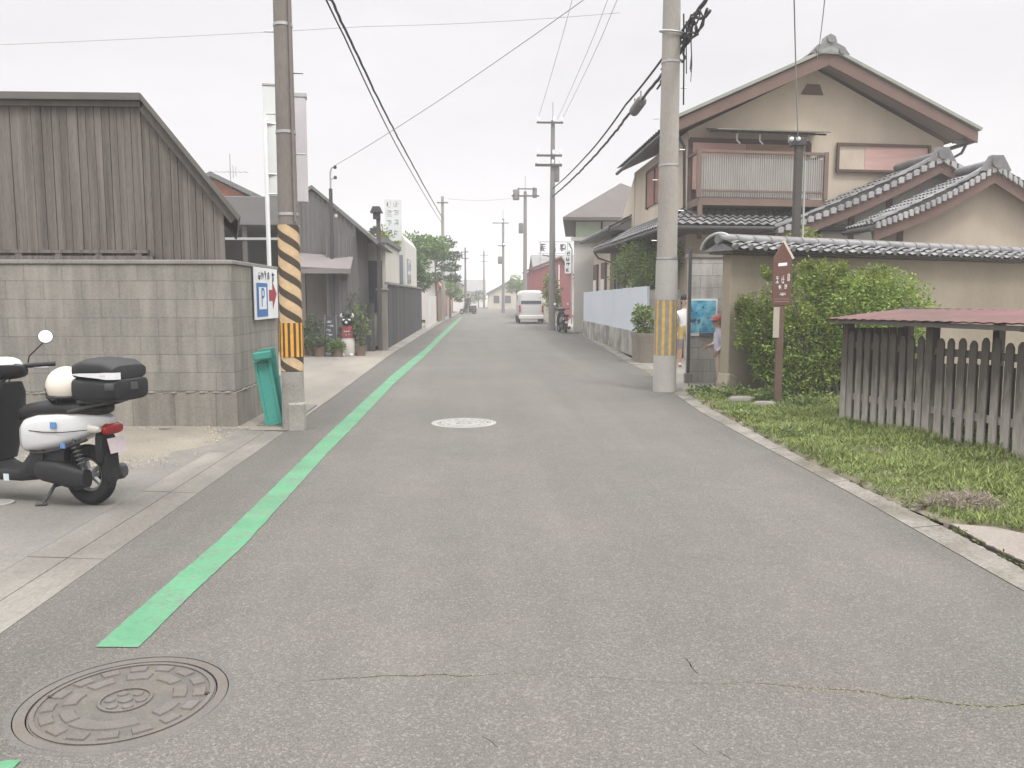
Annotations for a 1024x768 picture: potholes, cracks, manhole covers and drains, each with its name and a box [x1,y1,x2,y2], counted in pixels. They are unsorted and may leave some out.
crack [262,672,1024,711]
manhole cover [3,654,235,757]
manhole cover [431,418,496,428]
